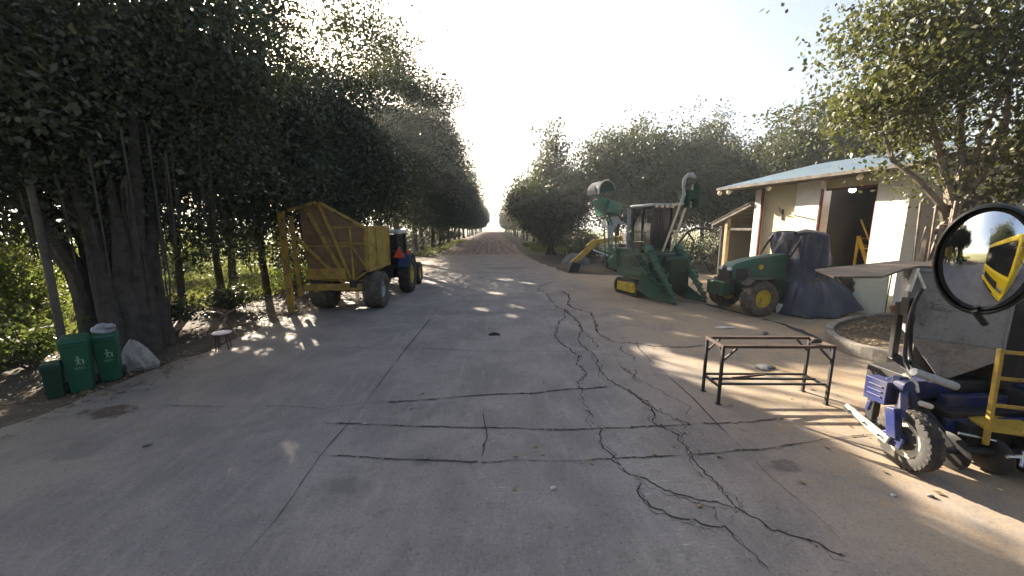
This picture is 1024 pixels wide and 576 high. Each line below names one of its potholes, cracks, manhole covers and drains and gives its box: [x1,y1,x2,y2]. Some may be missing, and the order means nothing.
crack [172,282,873,572]
